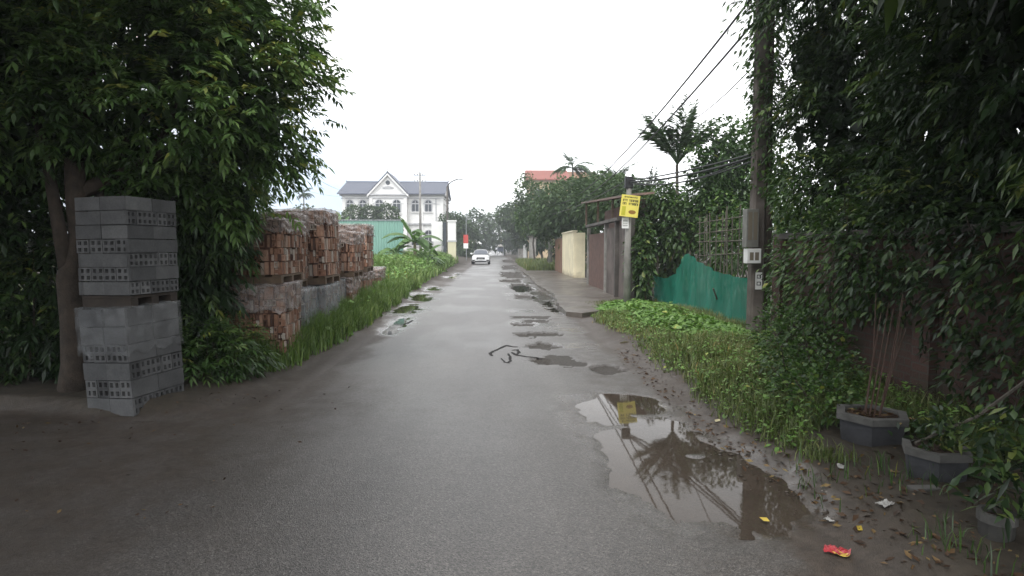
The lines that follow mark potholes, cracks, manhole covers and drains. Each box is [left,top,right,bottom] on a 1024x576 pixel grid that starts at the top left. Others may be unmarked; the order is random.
pothole [588,364,628,376]
pothole [523,341,565,351]
pothole [512,331,566,339]
pothole [517,355,593,368]
pothole [509,283,538,292]
